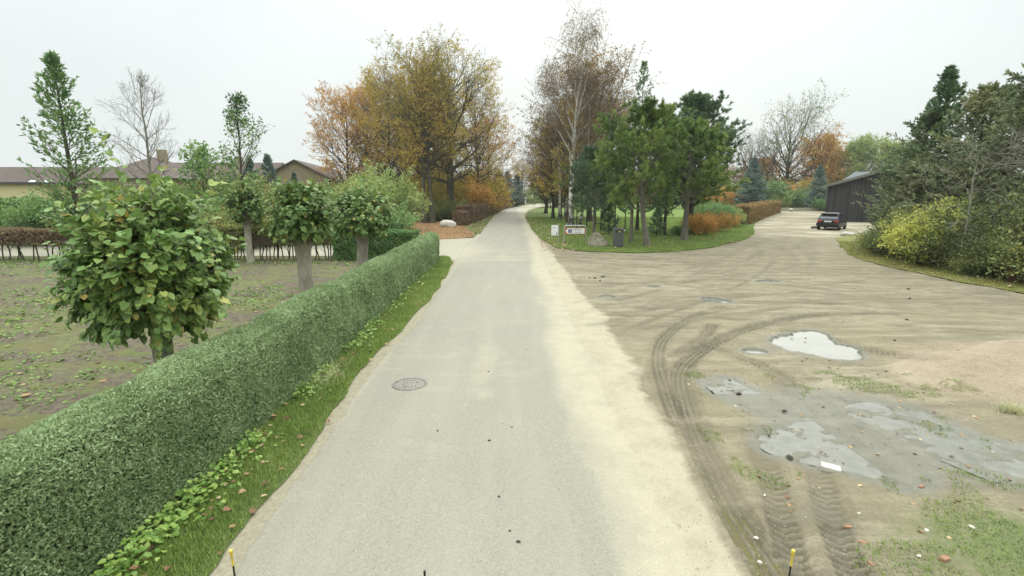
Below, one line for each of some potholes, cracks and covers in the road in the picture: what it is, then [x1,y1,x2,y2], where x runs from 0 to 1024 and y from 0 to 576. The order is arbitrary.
pothole [736,347,773,355]
manhole cover [392,378,427,391]
pothole [764,327,874,363]
